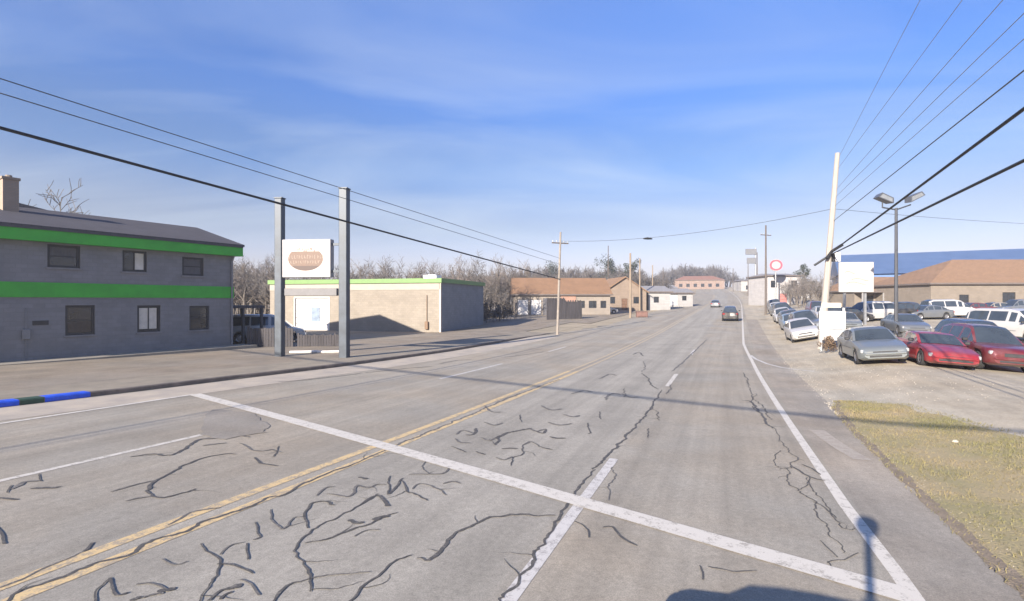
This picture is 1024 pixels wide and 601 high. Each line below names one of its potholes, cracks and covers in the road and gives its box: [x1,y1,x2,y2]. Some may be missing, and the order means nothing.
crack [111,430,281,525]
crack [11,474,41,489]
crack [162,339,707,601]
crack [742,373,858,566]
crack [94,578,111,601]
